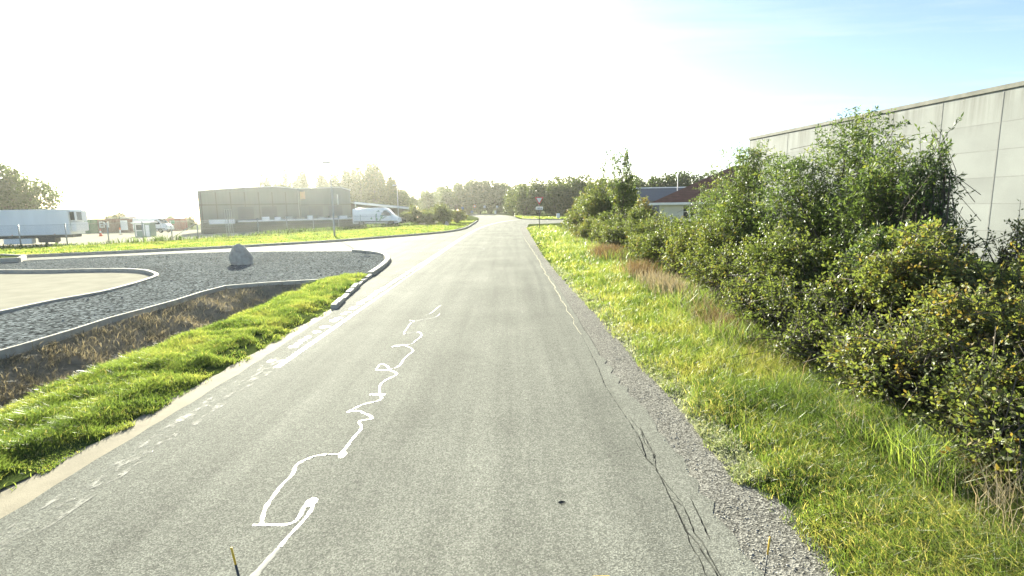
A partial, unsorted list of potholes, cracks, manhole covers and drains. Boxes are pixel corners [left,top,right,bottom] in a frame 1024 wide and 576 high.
crack [524,237,721,576]
